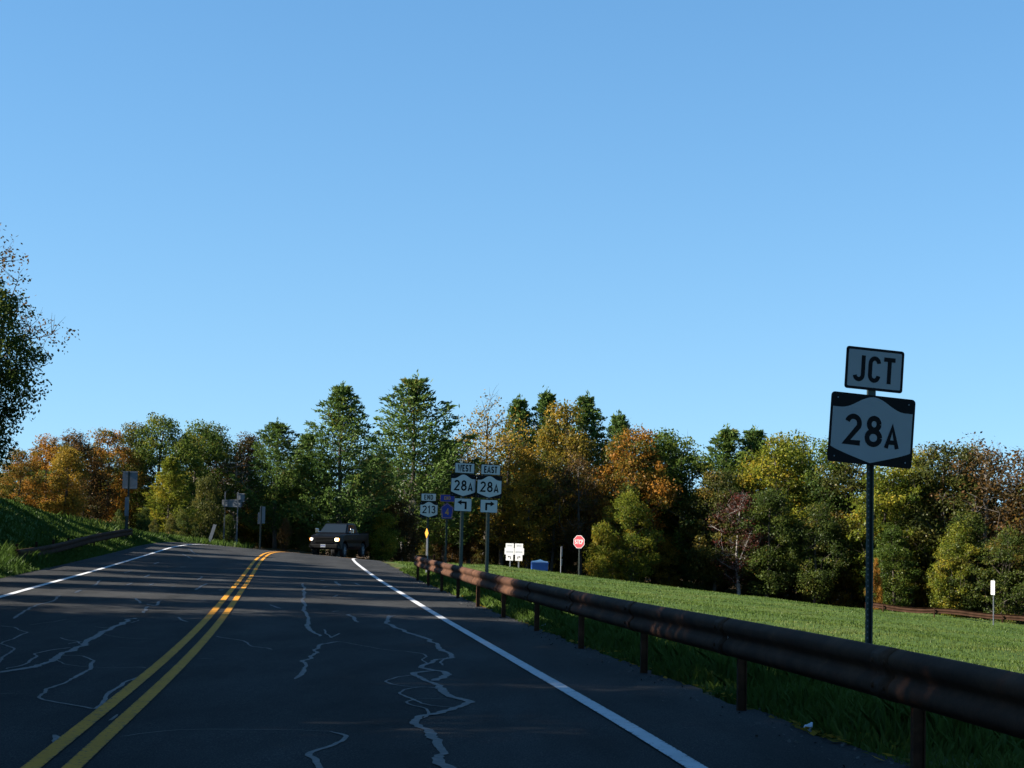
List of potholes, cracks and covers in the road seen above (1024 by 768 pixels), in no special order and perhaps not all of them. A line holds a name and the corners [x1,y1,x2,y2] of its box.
crack [0,596,315,736]
crack [320,580,450,718]
